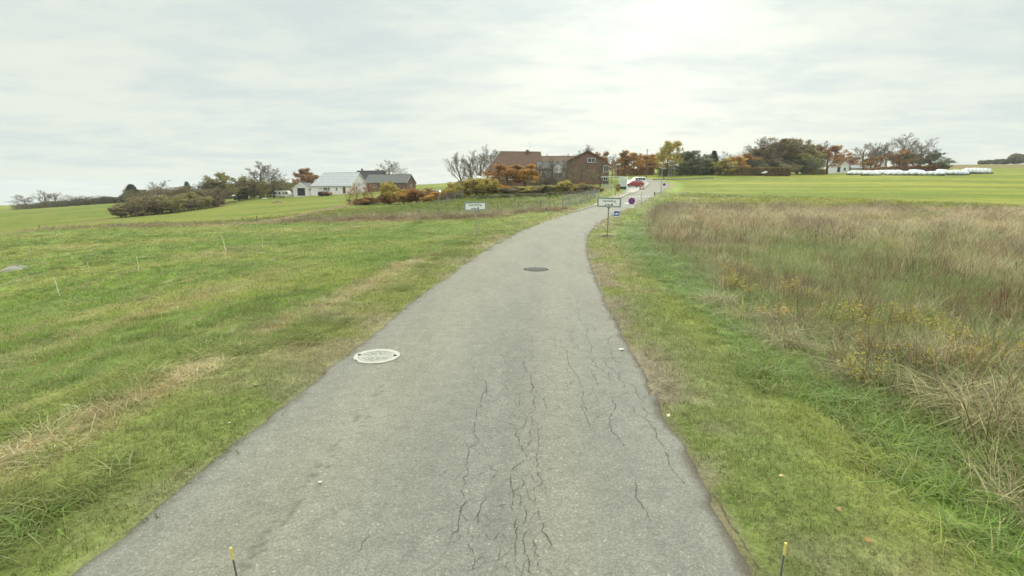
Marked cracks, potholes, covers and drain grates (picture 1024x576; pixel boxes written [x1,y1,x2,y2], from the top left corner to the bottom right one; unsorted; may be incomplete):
crack [428,299,612,576]
manhole cover [353,349,400,364]
crack [541,282,684,483]
